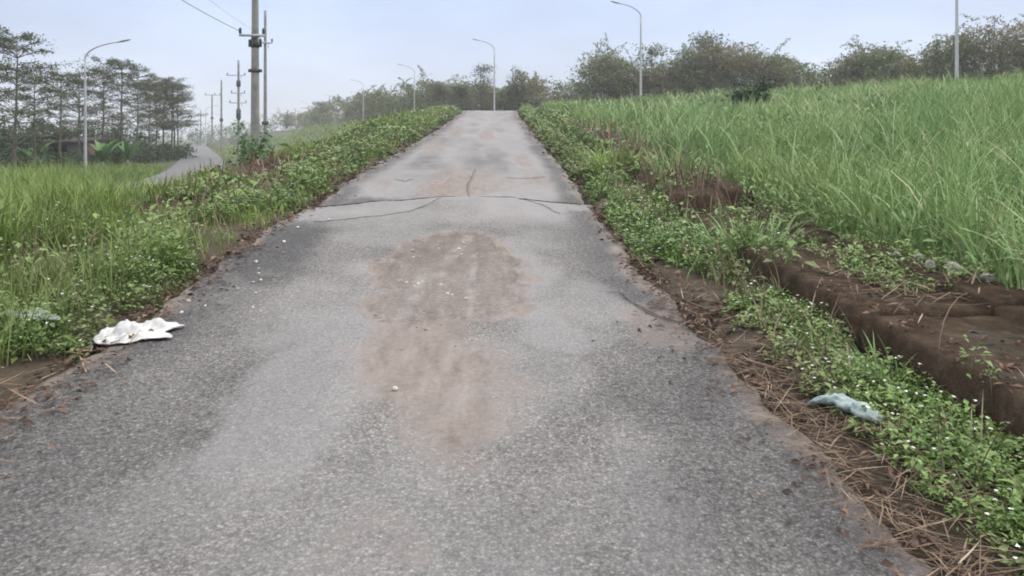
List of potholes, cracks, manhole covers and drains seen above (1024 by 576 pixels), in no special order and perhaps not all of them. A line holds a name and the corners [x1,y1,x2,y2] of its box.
crack [315,170,584,222]
crack [618,291,690,325]
